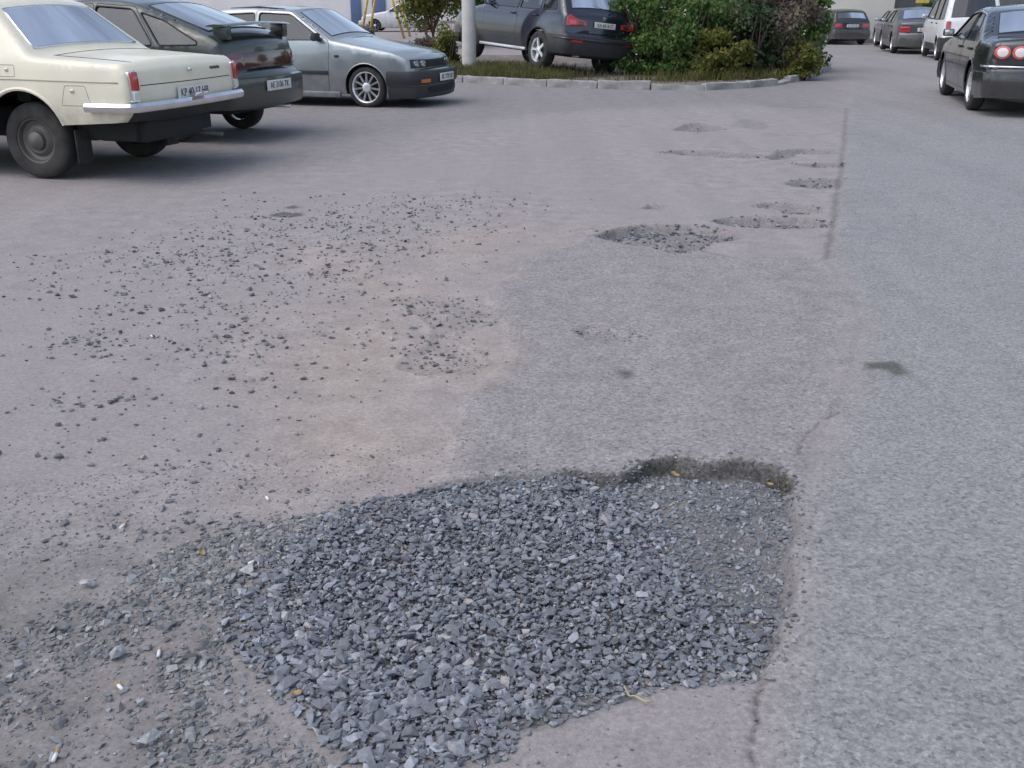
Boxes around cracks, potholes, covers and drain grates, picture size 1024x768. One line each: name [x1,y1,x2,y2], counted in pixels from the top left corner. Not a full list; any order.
pothole [391,295,502,378]
pothole [706,216,837,229]
pothole [780,178,848,189]
crack [743,685,765,768]
pothole [670,123,729,133]
pothole [279,455,806,759]
pothole [763,148,840,161]
crack [793,413,838,455]
pothole [587,224,745,255]
